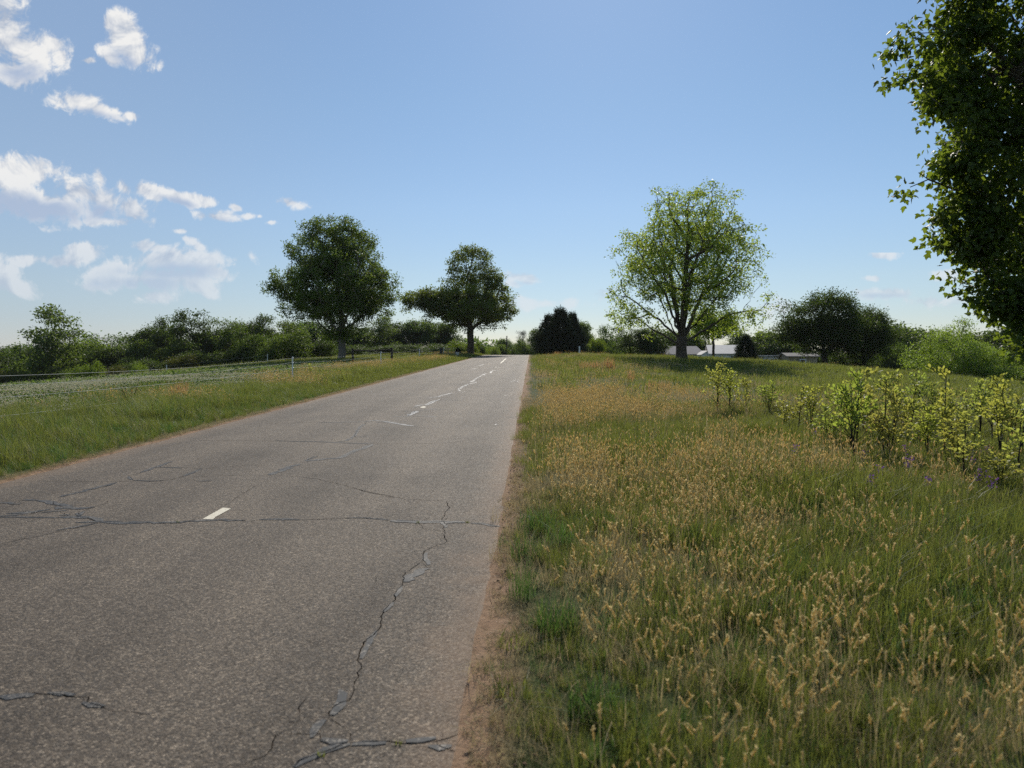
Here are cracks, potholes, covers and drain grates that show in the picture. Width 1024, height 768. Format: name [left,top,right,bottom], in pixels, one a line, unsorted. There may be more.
crack [200,475,457,768]
crack [0,691,154,716]
